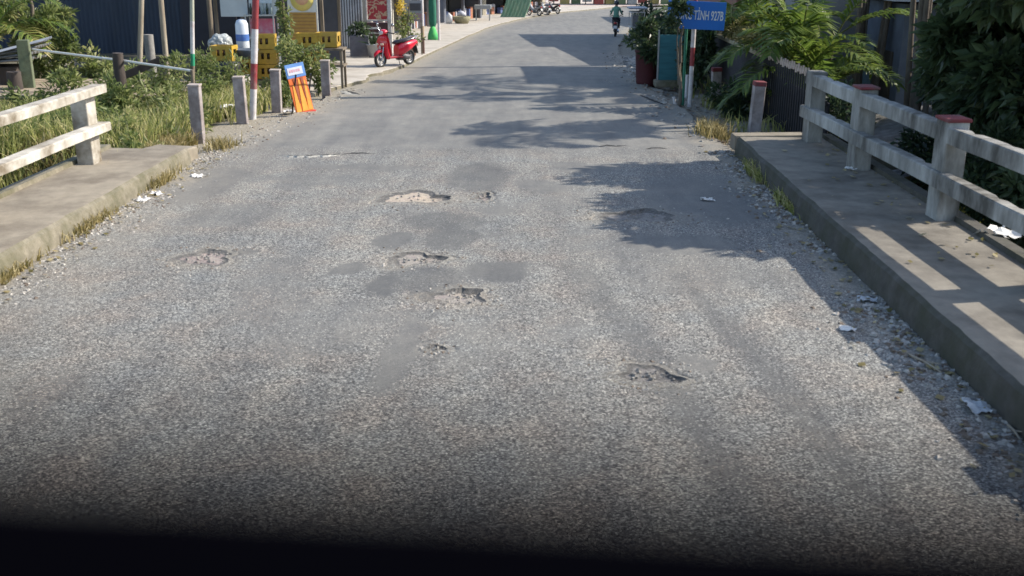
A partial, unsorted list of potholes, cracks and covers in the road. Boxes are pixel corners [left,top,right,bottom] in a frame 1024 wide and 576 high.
pothole [417,342,456,355]
pothole [470,191,496,203]
pothole [385,251,456,268]
pothole [165,248,239,268]
pothole [371,189,456,205]
pothole [608,361,696,388]
pothole [418,286,493,307]
pothole [592,208,680,224]
